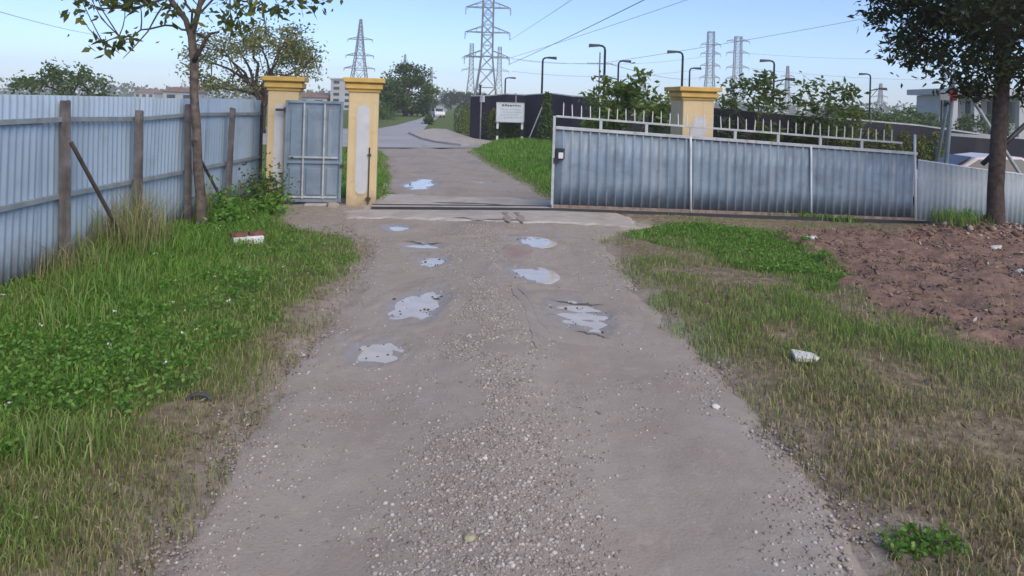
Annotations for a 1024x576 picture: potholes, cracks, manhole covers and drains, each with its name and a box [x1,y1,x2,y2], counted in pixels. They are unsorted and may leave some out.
pothole [509,289,645,346]
pothole [489,233,569,251]
pothole [351,273,475,338]
pothole [480,260,574,290]
pothole [400,251,463,273]
pothole [388,239,455,252]
pothole [383,176,451,194]
pothole [365,221,422,235]
